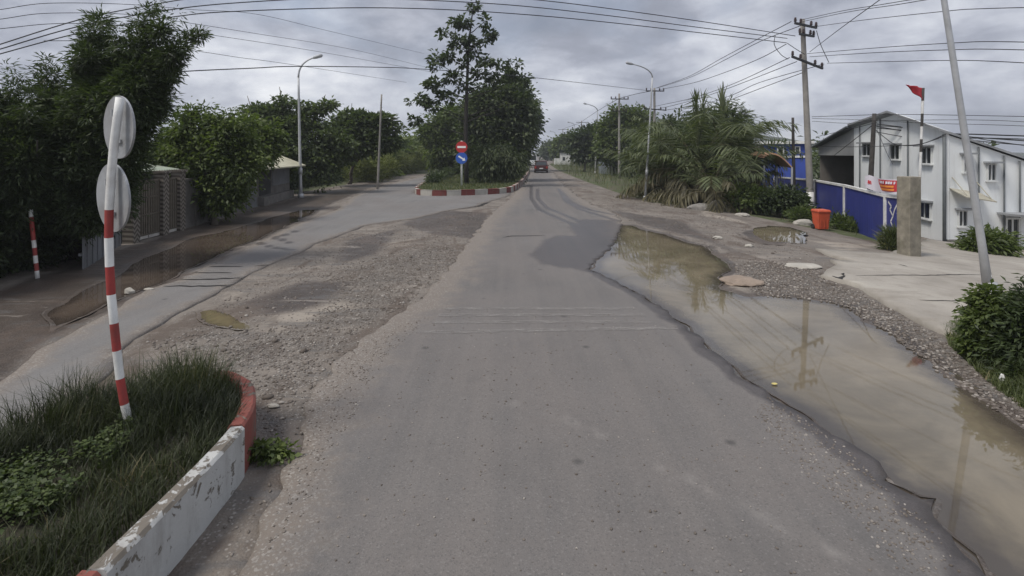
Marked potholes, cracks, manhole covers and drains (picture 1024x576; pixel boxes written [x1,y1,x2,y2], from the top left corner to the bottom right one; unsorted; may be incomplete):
pothole [41,209,318,331]
pothole [589,225,1024,576]
